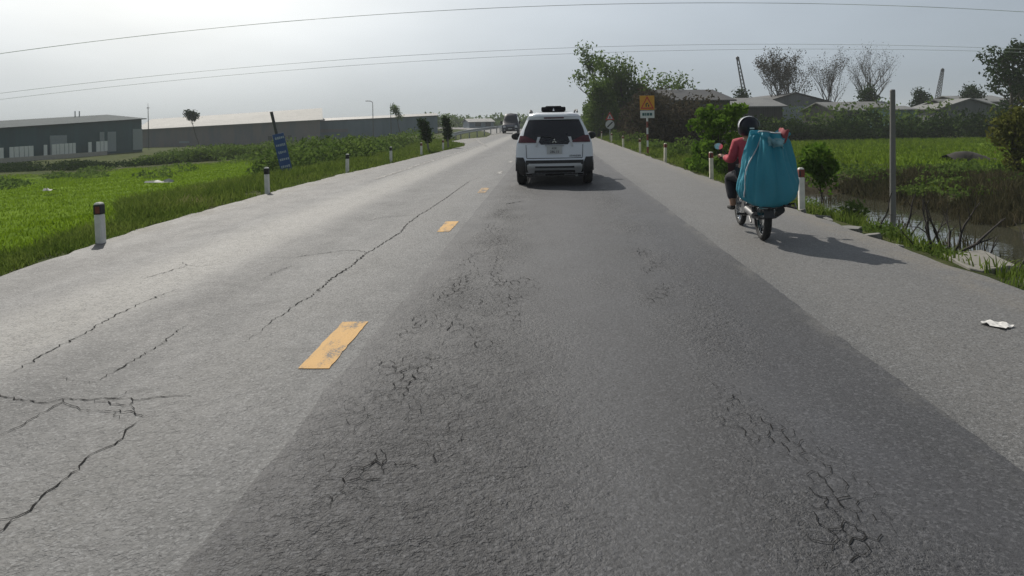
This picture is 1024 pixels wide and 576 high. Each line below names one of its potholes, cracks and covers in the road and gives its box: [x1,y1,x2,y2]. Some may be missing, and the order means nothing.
crack [0,376,190,531]
crack [710,381,895,568]
crack [249,178,477,338]
crack [12,264,212,372]
